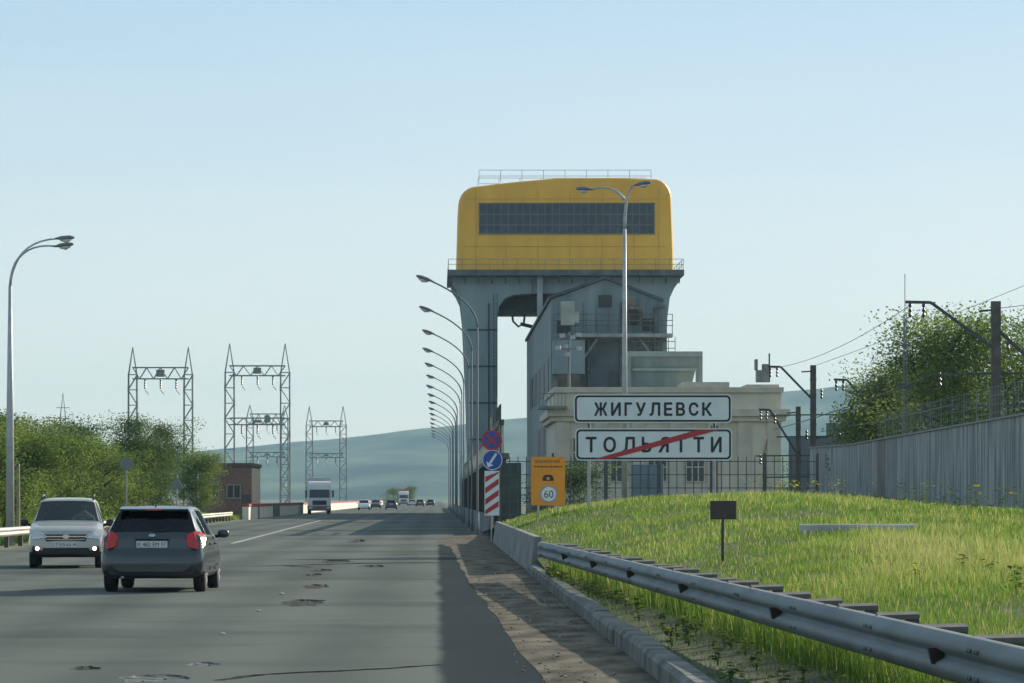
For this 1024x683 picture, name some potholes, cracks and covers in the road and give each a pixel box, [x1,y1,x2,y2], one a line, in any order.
pothole [279,599,326,607]
pothole [119,674,190,683]
